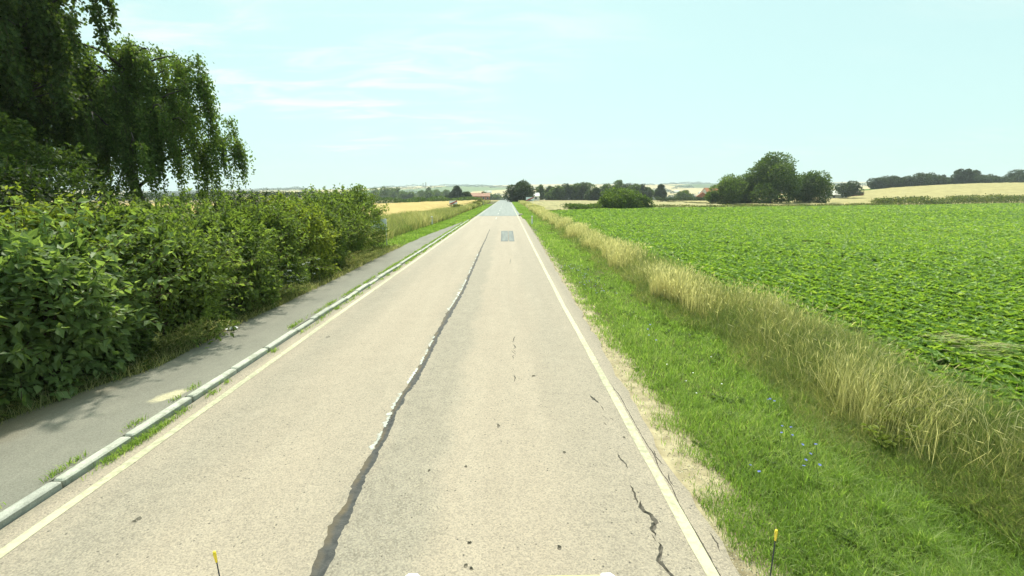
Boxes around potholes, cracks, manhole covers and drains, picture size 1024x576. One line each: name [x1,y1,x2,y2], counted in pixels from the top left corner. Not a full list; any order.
crack [590,387,721,576]
